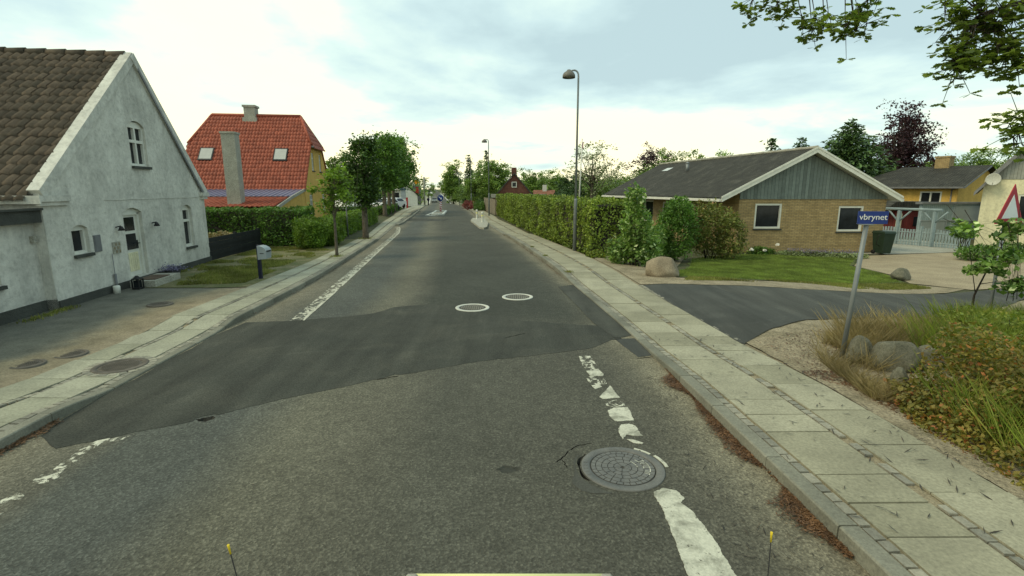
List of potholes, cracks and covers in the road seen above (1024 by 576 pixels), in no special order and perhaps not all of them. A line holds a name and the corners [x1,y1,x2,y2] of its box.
manhole cover [9,359,47,369]
manhole cover [581,447,665,492]
manhole cover [455,304,489,312]
manhole cover [90,358,149,374]
manhole cover [54,349,89,359]
